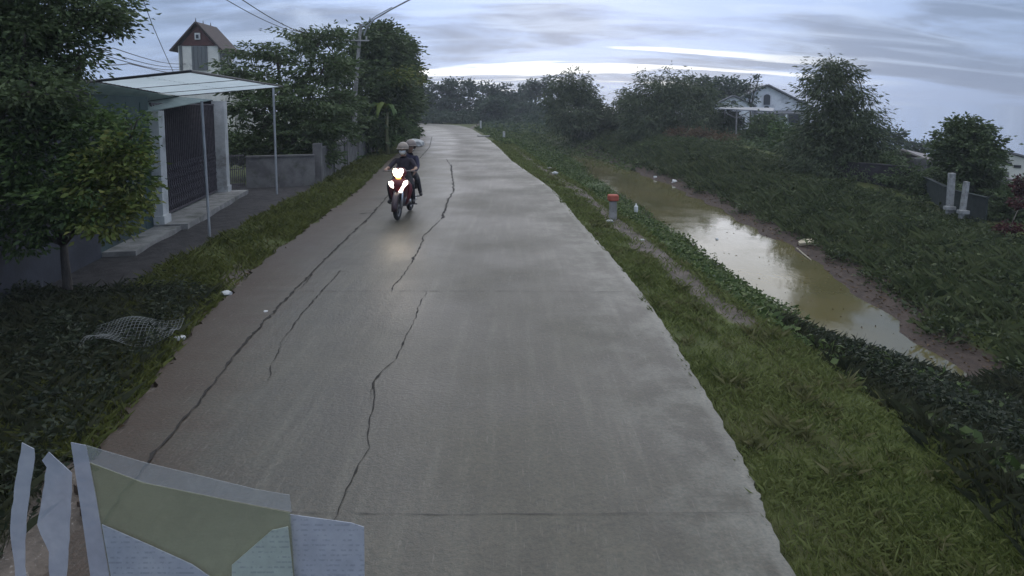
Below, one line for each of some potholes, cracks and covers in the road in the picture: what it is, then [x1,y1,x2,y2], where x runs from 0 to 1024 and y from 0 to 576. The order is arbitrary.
crack [102,137,455,524]
